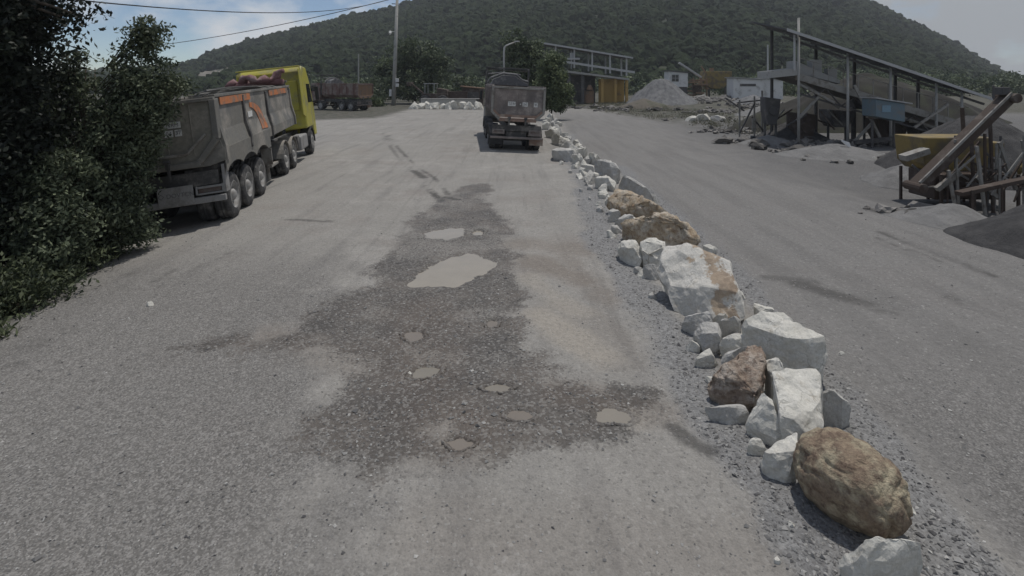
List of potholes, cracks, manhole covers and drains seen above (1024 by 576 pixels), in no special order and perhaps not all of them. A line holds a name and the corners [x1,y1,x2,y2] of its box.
pothole [477,381,519,395]
pothole [501,406,539,422]
pothole [398,328,428,344]
pothole [404,362,447,381]
pothole [469,228,487,236]
pothole [588,403,641,427]
pothole [388,248,511,294]
pothole [441,434,480,452]
pothole [417,226,476,242]
pothole [484,317,502,328]
